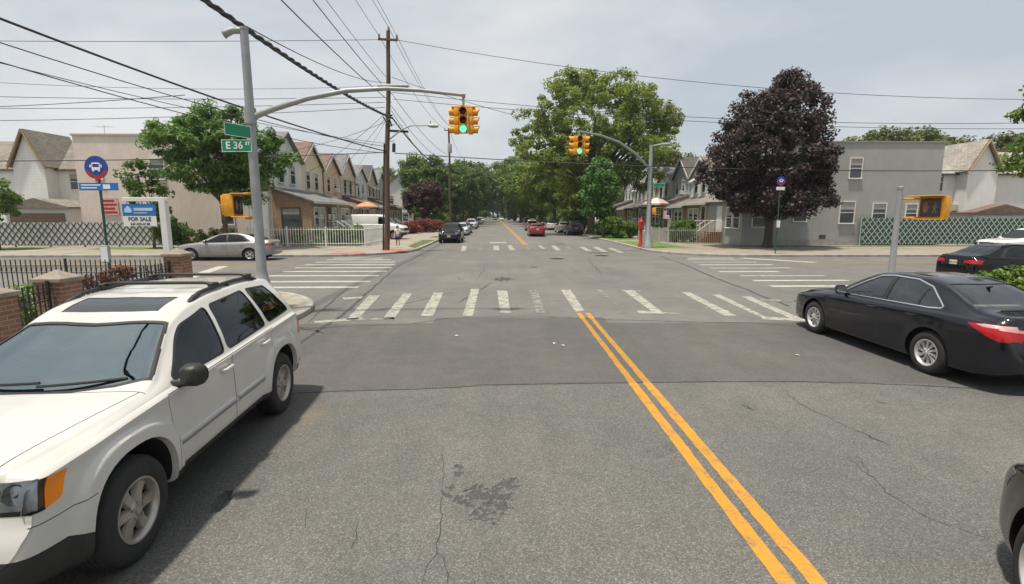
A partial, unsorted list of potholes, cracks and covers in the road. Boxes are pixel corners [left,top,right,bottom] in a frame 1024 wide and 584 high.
crack [422,448,449,582]
crack [850,456,1002,551]
